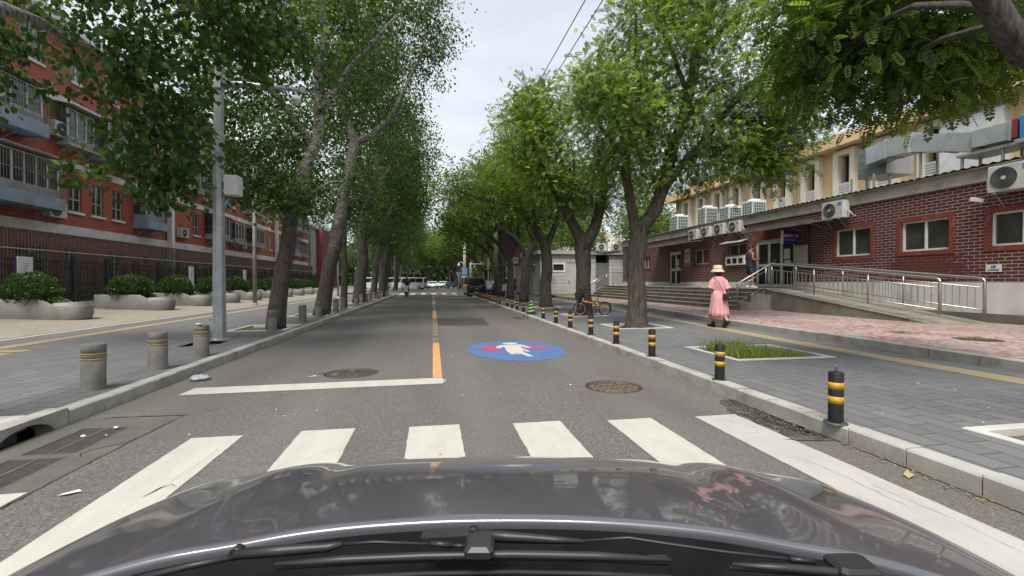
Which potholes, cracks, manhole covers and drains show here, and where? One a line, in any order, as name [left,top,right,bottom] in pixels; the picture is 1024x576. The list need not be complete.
drain grate [16,426,133,457]
manhole cover [318,368,378,379]
drain grate [0,456,71,490]
manhole cover [585,380,643,394]
